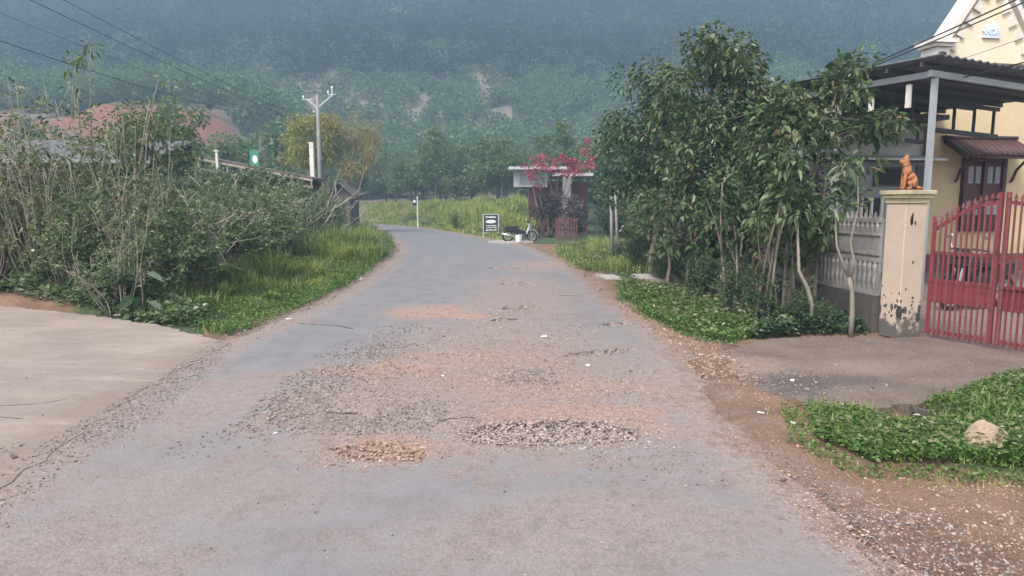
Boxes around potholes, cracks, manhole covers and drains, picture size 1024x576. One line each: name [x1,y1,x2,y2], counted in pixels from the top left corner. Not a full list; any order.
crack [2,399,65,419]
pothole [267,385,375,431]
pothole [457,418,641,447]
pothole [326,440,433,462]
pothole [562,348,639,357]
